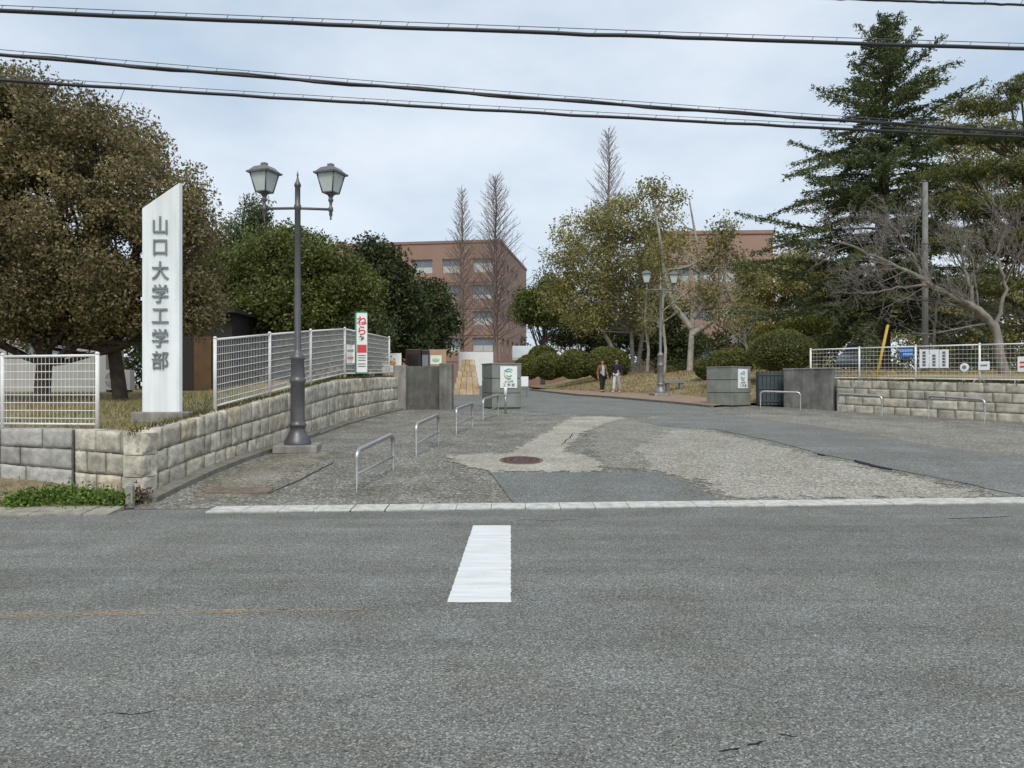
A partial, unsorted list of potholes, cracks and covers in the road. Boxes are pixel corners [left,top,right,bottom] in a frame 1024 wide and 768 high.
crack [719,734,797,752]
crack [268,463,333,494]
manhole cover [499,456,543,464]
